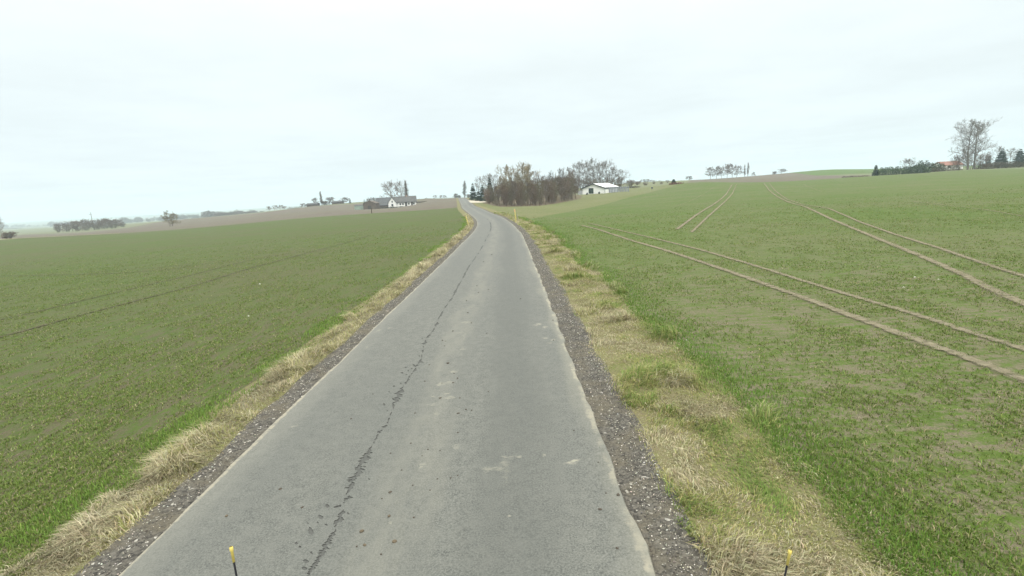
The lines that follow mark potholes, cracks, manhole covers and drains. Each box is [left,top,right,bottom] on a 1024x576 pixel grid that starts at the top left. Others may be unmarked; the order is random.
crack [295,219,492,576]
